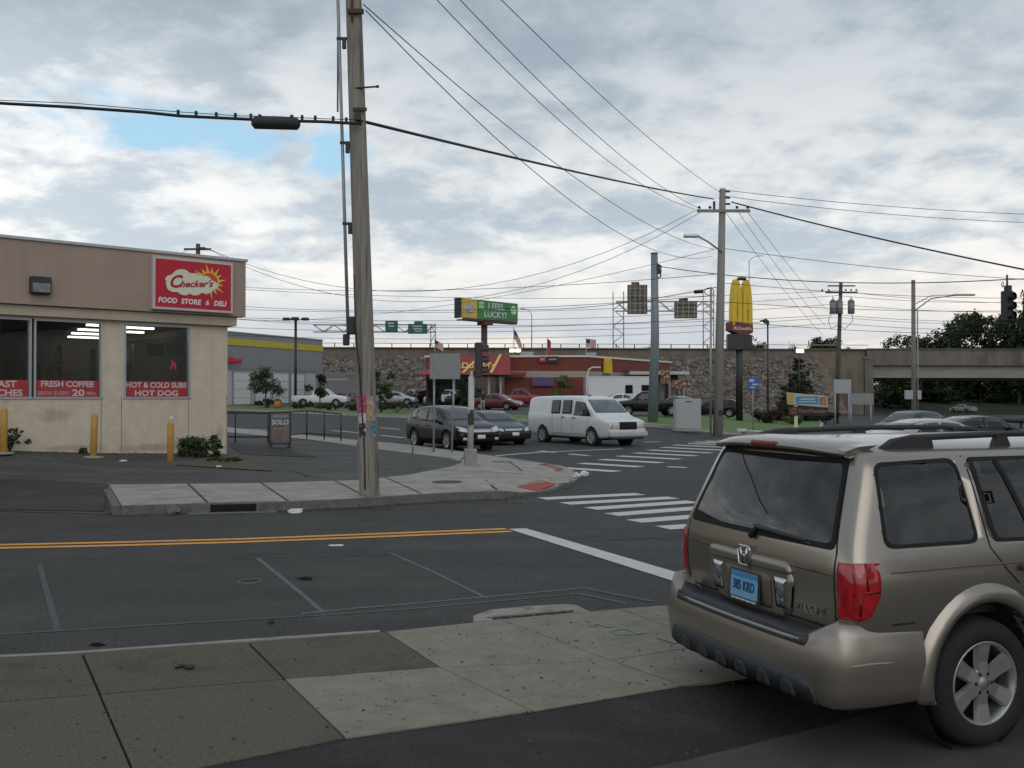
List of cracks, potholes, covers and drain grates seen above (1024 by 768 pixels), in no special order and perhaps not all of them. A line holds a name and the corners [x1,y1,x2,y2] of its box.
drain grate [188,501,277,514]
drain grate [473,604,589,623]
